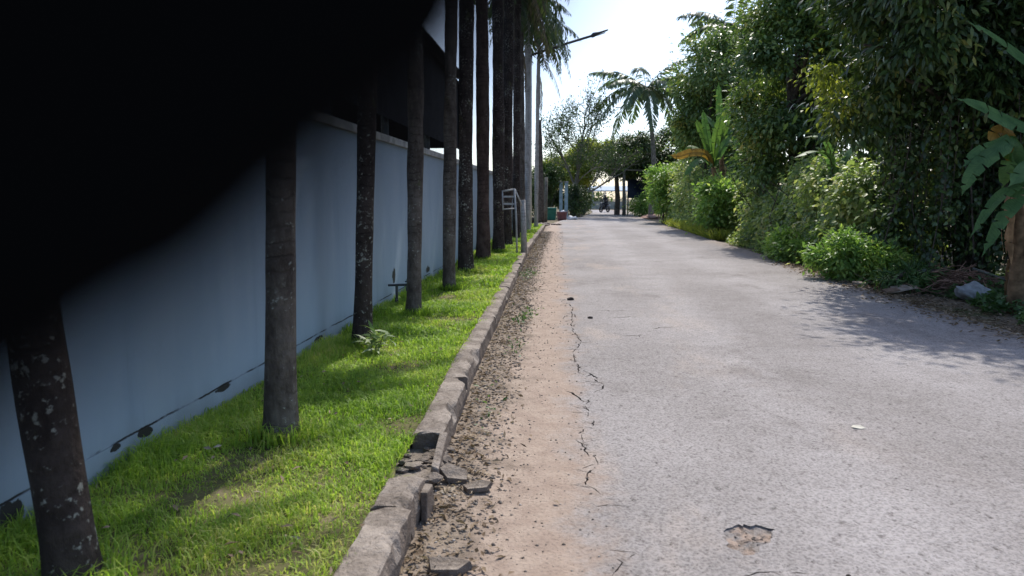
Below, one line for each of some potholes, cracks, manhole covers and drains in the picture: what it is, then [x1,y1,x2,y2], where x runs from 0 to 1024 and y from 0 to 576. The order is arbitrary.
pothole [723,524,774,555]
crack [565,303,618,507]
